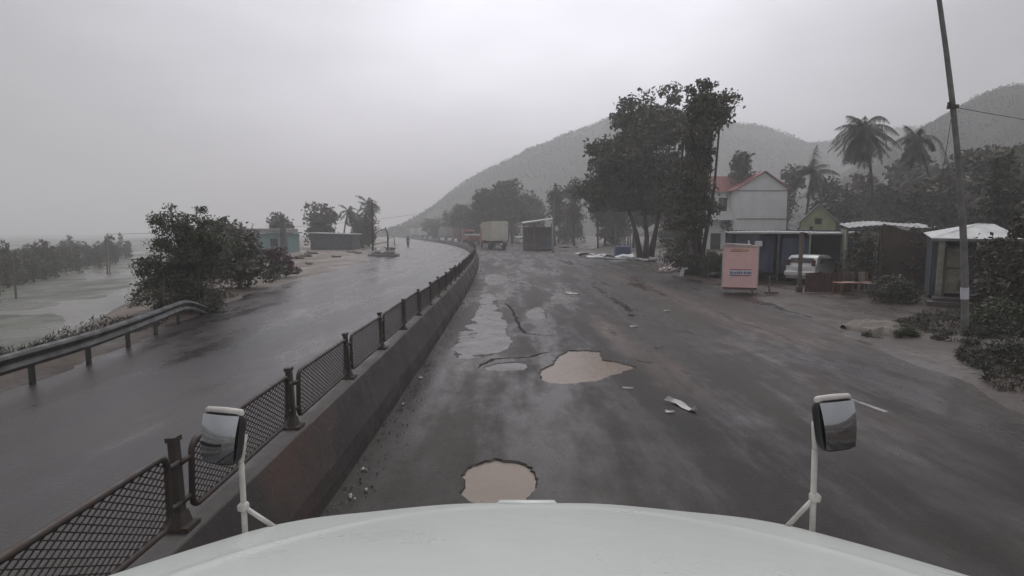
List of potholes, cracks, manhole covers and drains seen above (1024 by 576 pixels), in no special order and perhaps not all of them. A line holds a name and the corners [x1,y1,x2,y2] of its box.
pothole [524,306,547,320]
pothole [459,458,538,503]
pothole [539,350,636,384]
pothole [483,362,529,371]
crack [478,302,565,368]
pothole [448,292,514,359]
